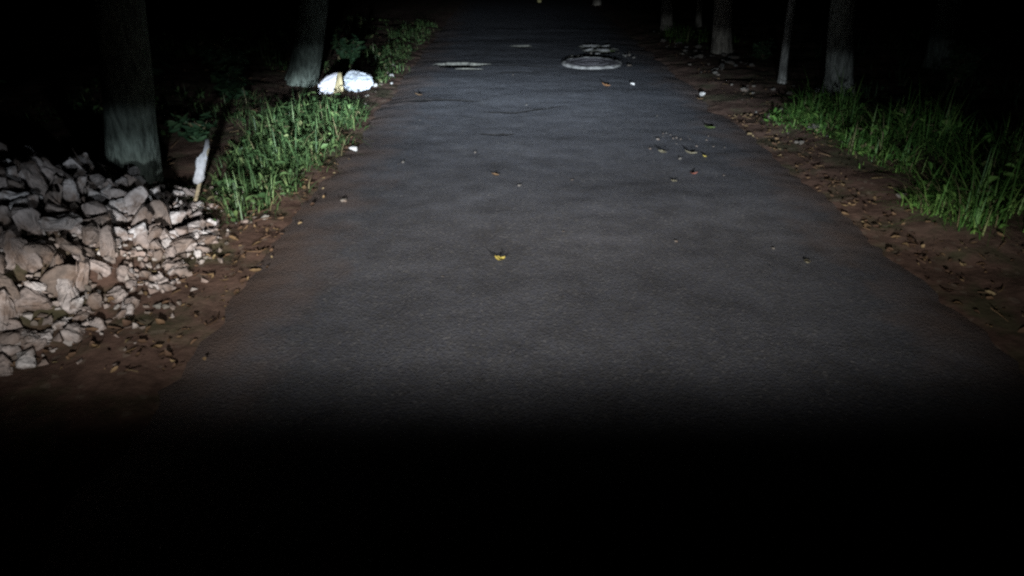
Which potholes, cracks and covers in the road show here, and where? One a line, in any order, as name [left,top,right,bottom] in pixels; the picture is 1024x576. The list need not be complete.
crack [389,99,563,114]
manhole cover [562,57,622,69]
